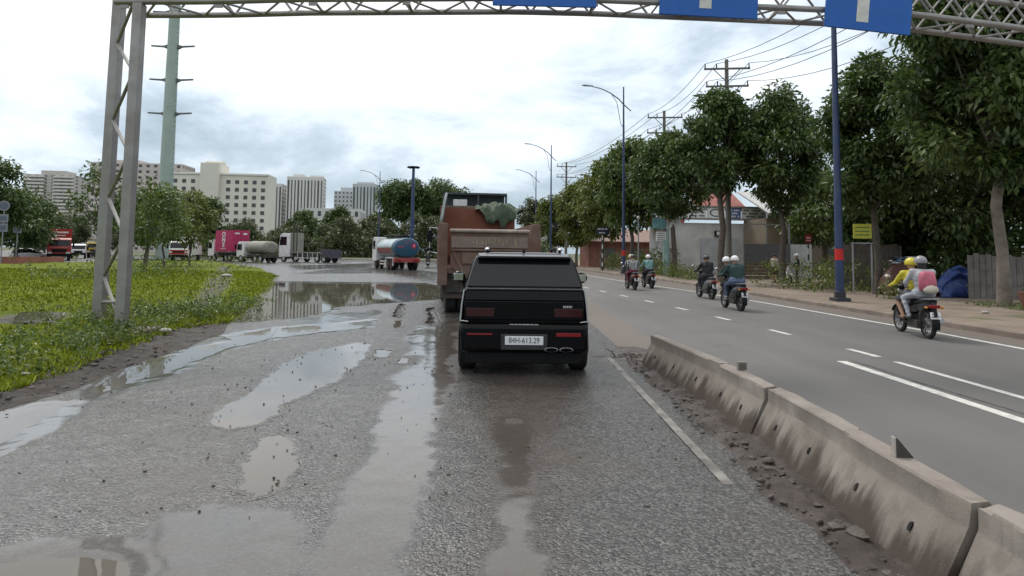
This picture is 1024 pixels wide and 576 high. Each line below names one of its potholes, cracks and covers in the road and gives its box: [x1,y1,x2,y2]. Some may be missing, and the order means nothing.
pothole [422,307,444,325]
pothole [228,432,308,501]
pothole [203,342,376,431]
pothole [389,303,410,319]
